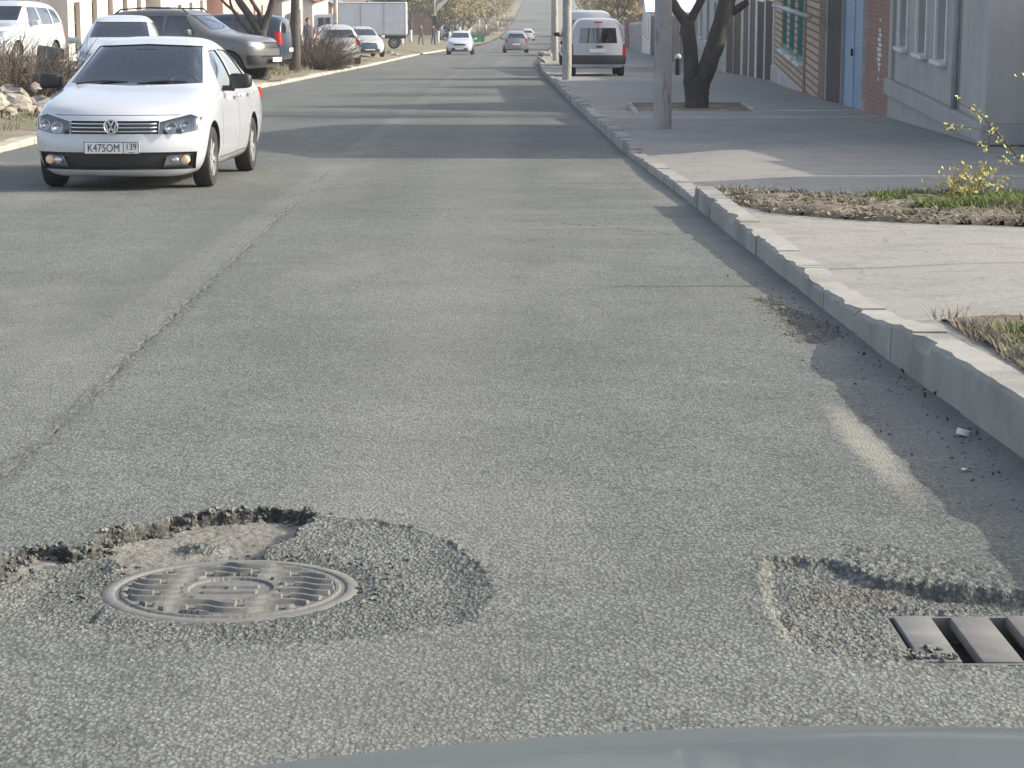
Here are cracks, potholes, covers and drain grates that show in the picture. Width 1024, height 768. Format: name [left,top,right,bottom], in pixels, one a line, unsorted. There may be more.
pothole [755,555,1024,668]
drain grate [885,616,1024,666]
pothole [0,508,497,648]
manhole cover [101,560,359,623]
